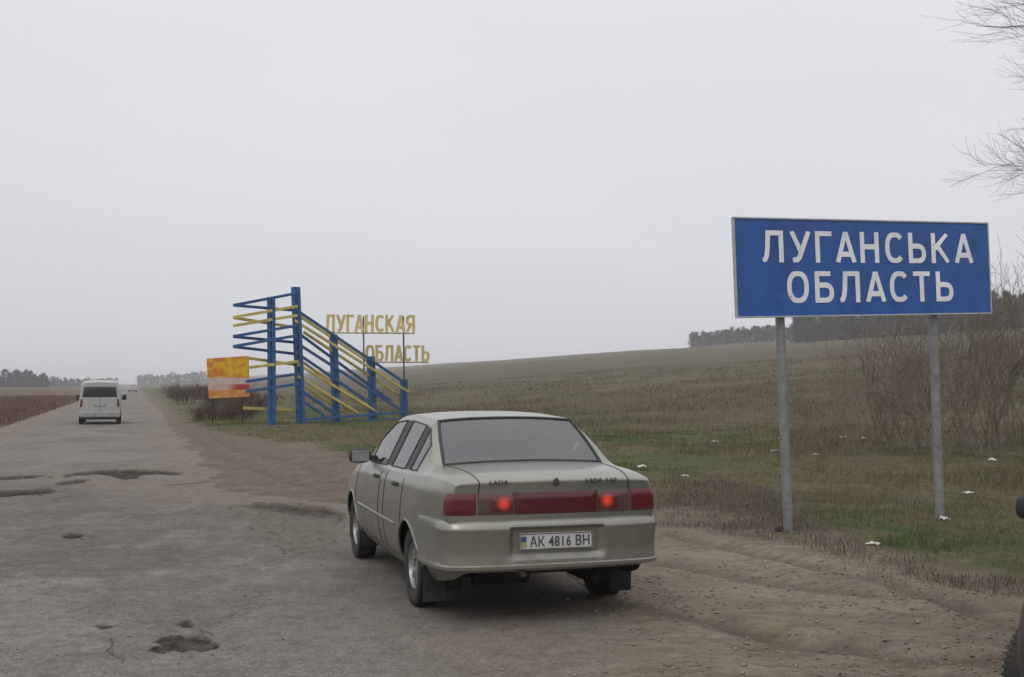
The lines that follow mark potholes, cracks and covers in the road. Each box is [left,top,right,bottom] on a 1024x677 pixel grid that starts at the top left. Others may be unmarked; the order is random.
pothole [43,478,100,487]
pothole [51,531,94,541]
pothole [0,488,70,498]
pothole [130,631,244,660]
pothole [37,468,191,481]
pothole [0,474,64,482]
